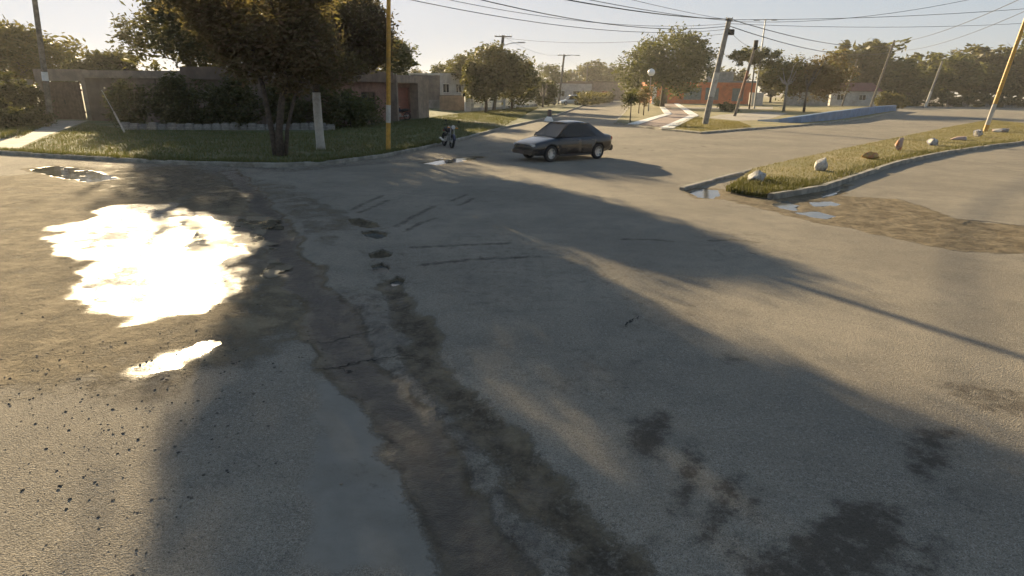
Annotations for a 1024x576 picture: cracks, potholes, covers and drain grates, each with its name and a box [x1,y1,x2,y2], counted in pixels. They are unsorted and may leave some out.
crack [318,355,410,372]
pothole [353,229,398,242]
pothole [357,247,404,262]
pothole [360,260,403,279]
pothole [341,217,387,231]
